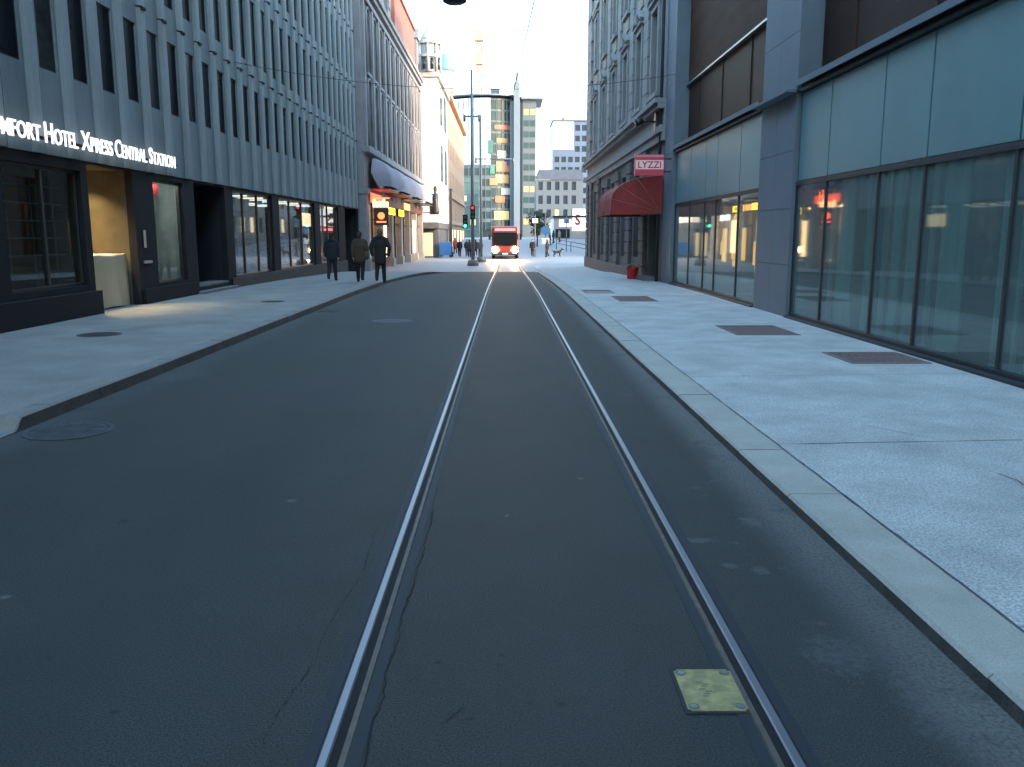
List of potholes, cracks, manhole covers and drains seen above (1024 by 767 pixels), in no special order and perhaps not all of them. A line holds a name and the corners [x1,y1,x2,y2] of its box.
crack [258,531,376,746]
manhole cover [21,421,116,440]
crack [362,511,434,767]
